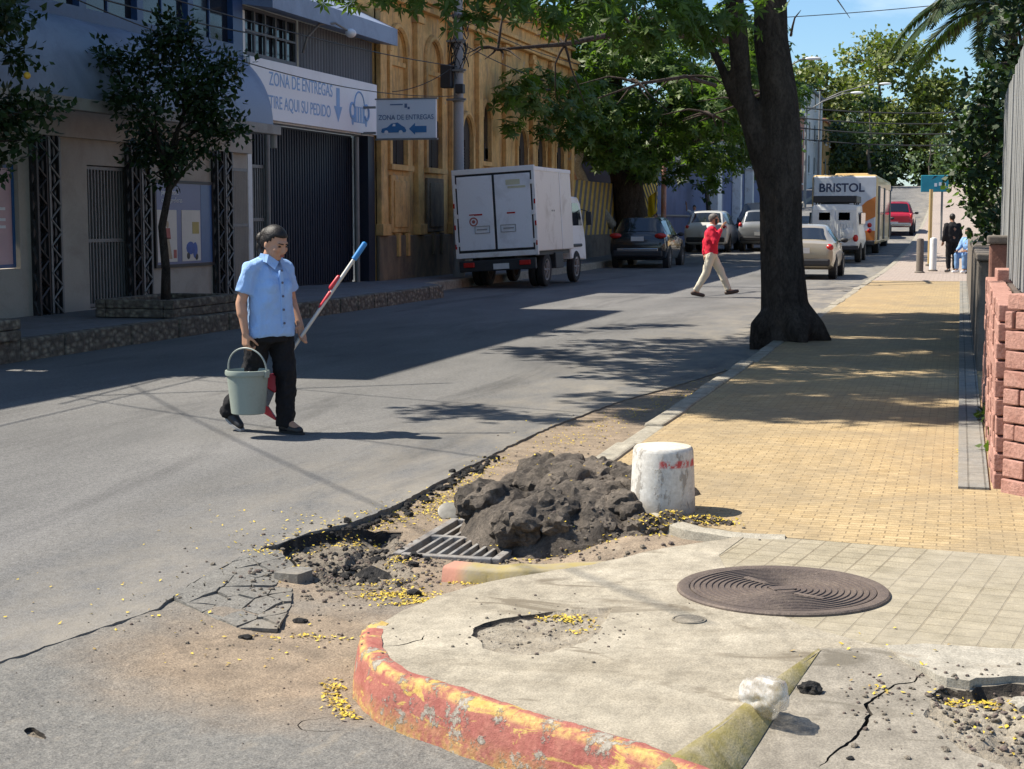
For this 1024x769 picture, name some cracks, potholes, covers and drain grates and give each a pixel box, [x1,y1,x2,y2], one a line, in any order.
manhole cover [677,565,891,617]
pothole [24,727,46,739]
pothole [282,529,418,591]
pothole [923,683,1024,769]
drain grate [393,518,512,564]
crack [820,673,923,766]
crack [173,548,294,633]
manhole cover [672,614,707,624]
pothole [471,608,612,656]
